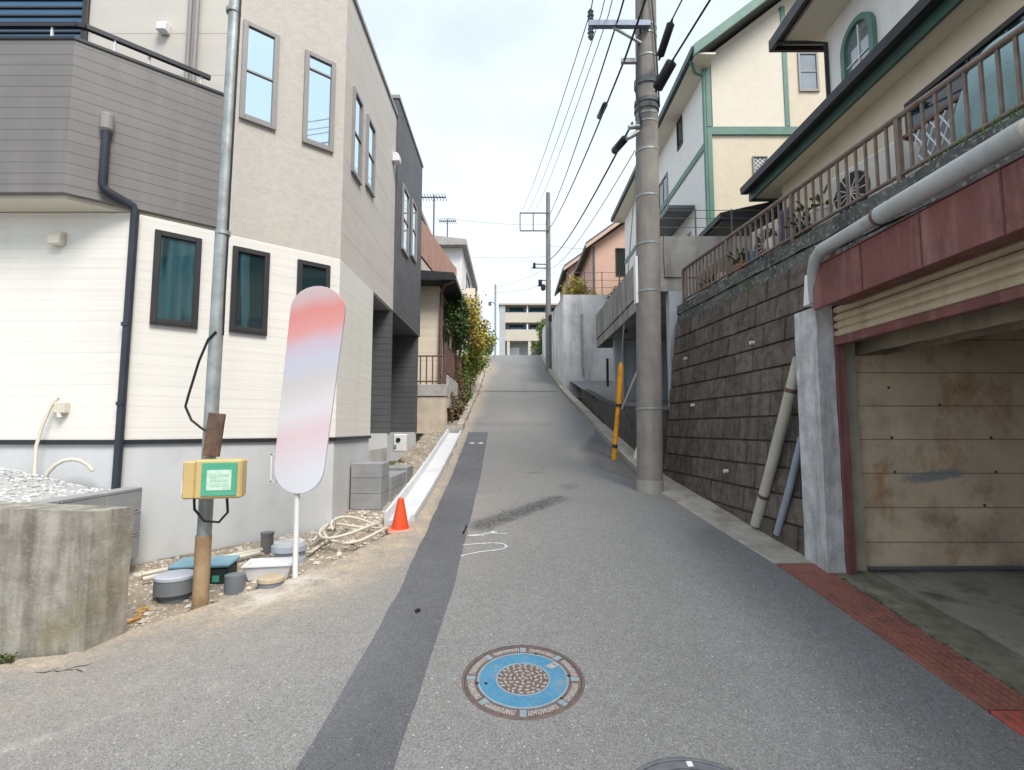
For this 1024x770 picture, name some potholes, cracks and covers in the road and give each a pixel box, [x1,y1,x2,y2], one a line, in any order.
manhole cover [461,646,585,721]
manhole cover [637,757,733,770]
crack [34,663,92,673]
